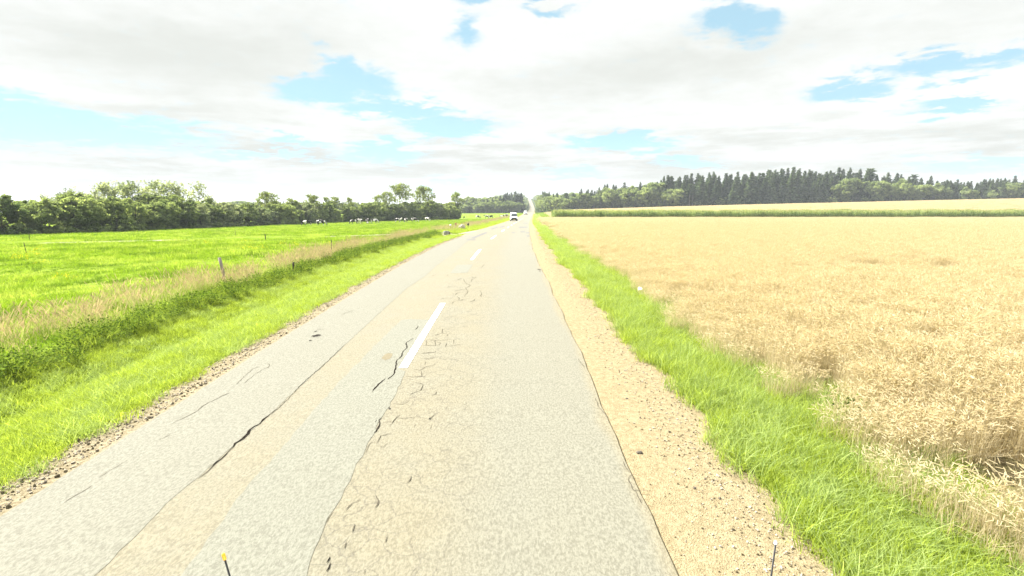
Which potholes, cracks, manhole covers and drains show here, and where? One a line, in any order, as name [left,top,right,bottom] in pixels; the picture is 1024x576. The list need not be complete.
crack [366,277,482,451]
crack [169,364,304,476]
